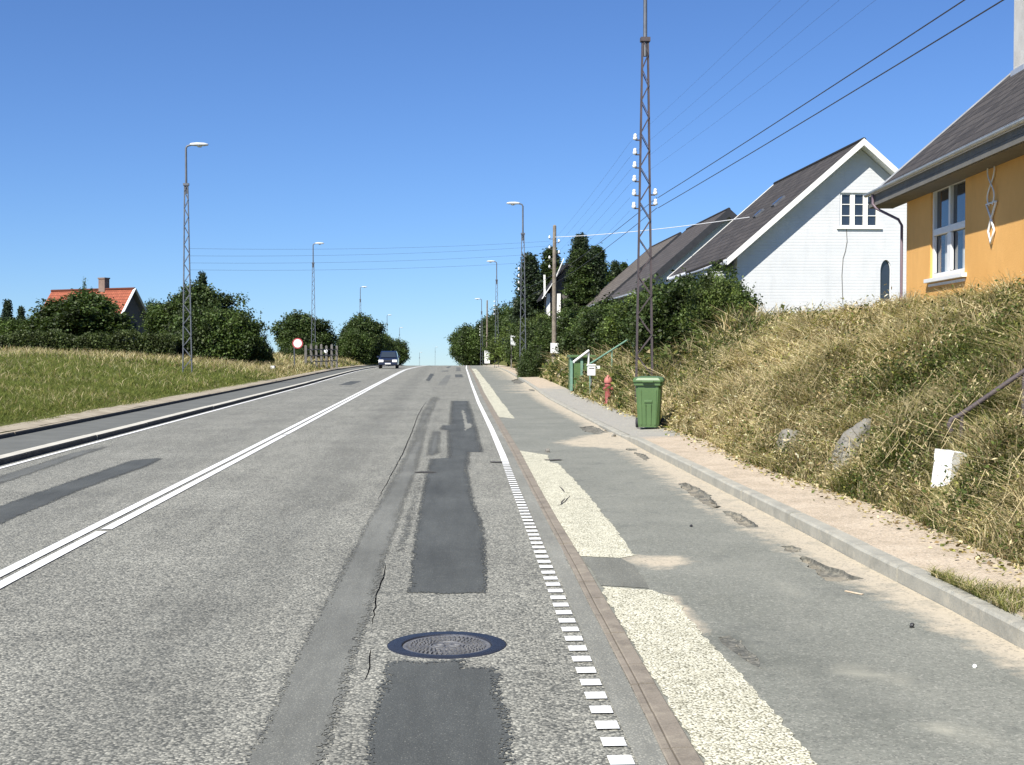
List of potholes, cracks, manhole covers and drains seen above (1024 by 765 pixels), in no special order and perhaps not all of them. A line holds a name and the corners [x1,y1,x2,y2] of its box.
pothole [718,635,761,668]
pothole [799,555,864,582]
pothole [723,511,758,527]
crack [372,566,386,624]
pothole [679,483,721,509]
manhole cover [387,631,507,659]
